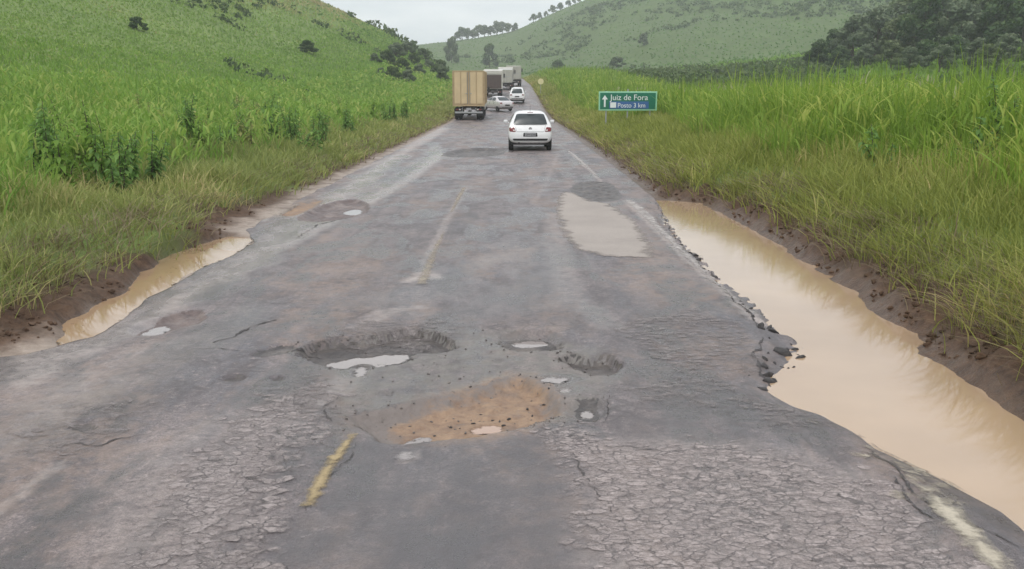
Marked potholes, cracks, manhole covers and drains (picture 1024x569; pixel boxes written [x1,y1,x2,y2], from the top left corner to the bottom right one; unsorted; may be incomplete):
pothole [557,354,624,376]
crack [532,204,1018,569]
pothole [351,375,565,445]
pothole [574,398,604,422]
pothole [497,340,564,352]
crack [115,348,356,569]
crack [17,400,141,457]
crack [199,319,276,350]
pothole [299,328,456,370]
